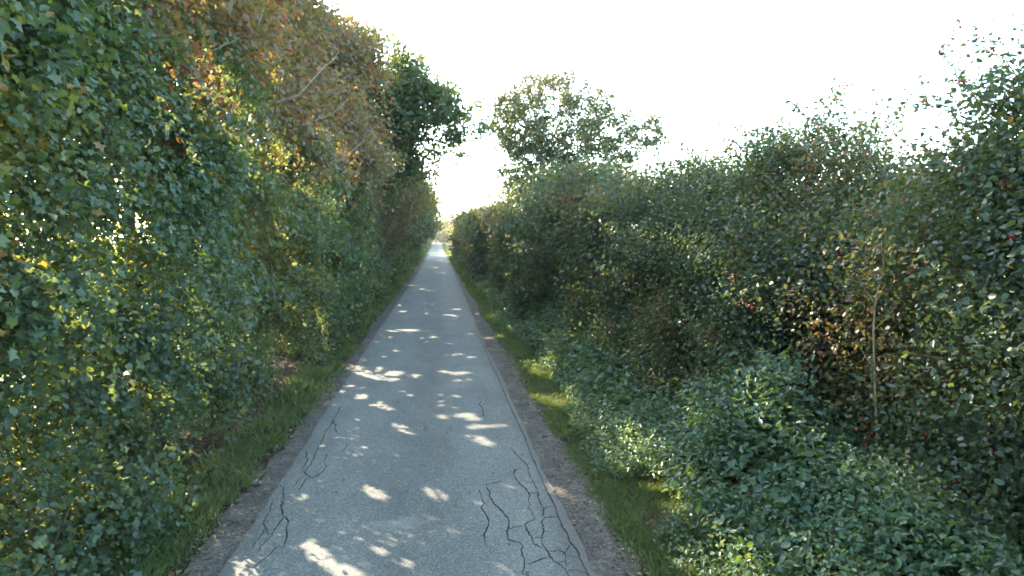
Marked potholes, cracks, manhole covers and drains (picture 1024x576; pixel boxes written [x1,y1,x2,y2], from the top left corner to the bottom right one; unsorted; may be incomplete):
crack [252,407,348,569]
crack [479,337,590,576]
